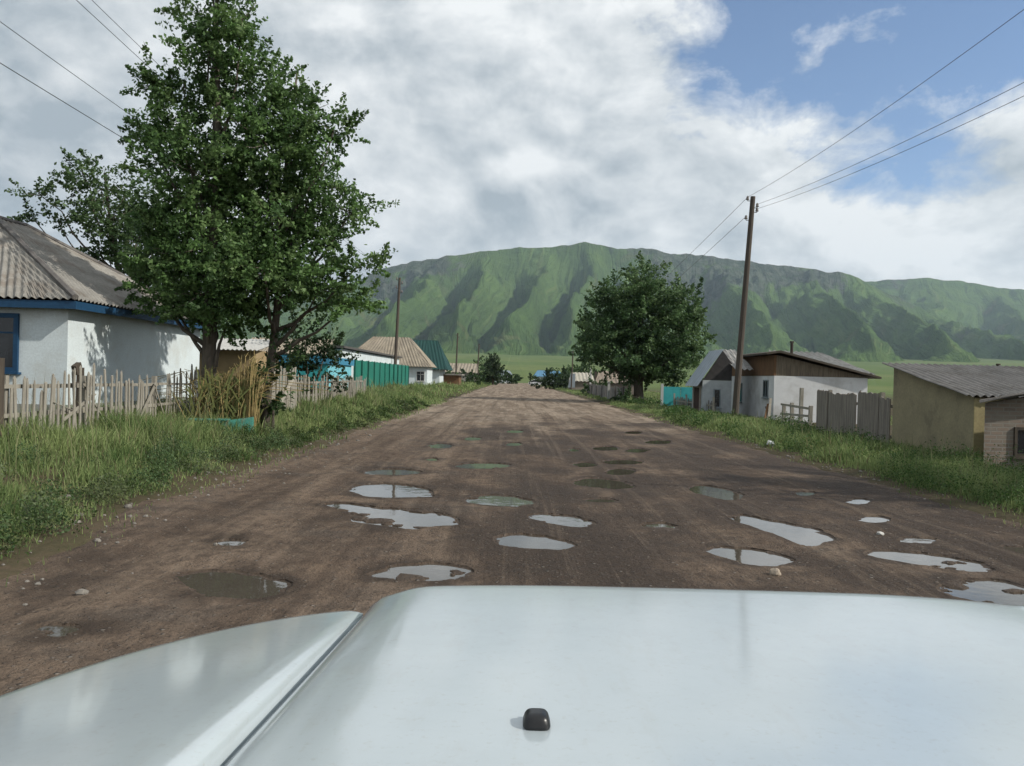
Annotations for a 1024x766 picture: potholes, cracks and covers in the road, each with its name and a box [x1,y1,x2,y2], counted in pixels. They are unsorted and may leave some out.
pothole [324,502,461,529]
pothole [863,549,996,572]
pothole [213,538,249,546]
pothole [526,512,597,527]
pothole [493,533,578,550]
pothole [462,494,536,507]
pothole [703,545,796,566]
pothole [346,482,435,498]
pothole [727,514,837,546]
pothole [169,569,293,599]
pothole [34,622,82,637]
pothole [366,561,474,581]
